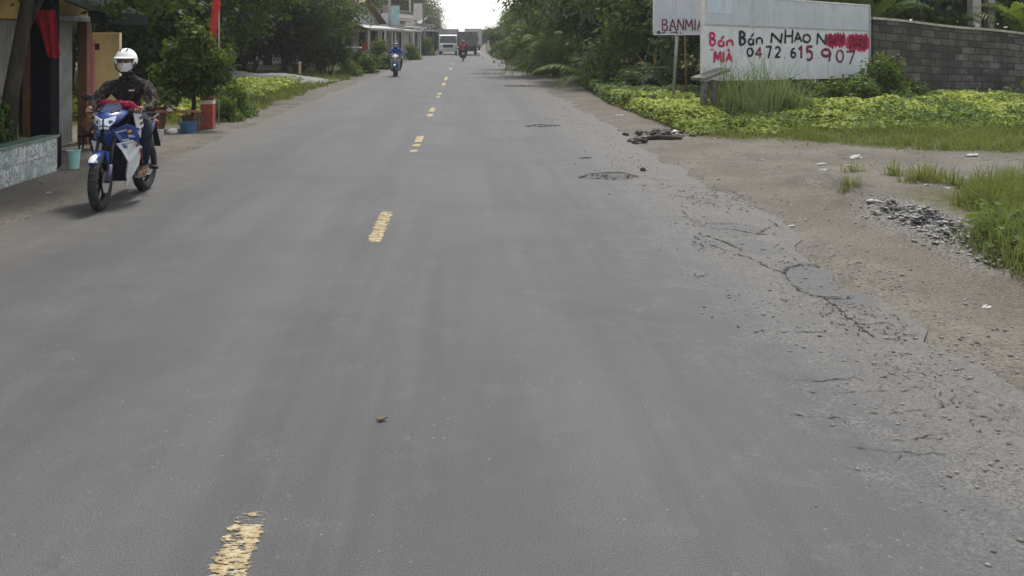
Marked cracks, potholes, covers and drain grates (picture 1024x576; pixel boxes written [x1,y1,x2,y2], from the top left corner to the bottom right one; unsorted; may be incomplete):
crack [645,177,1022,464]
pothole [577,172,639,180]
